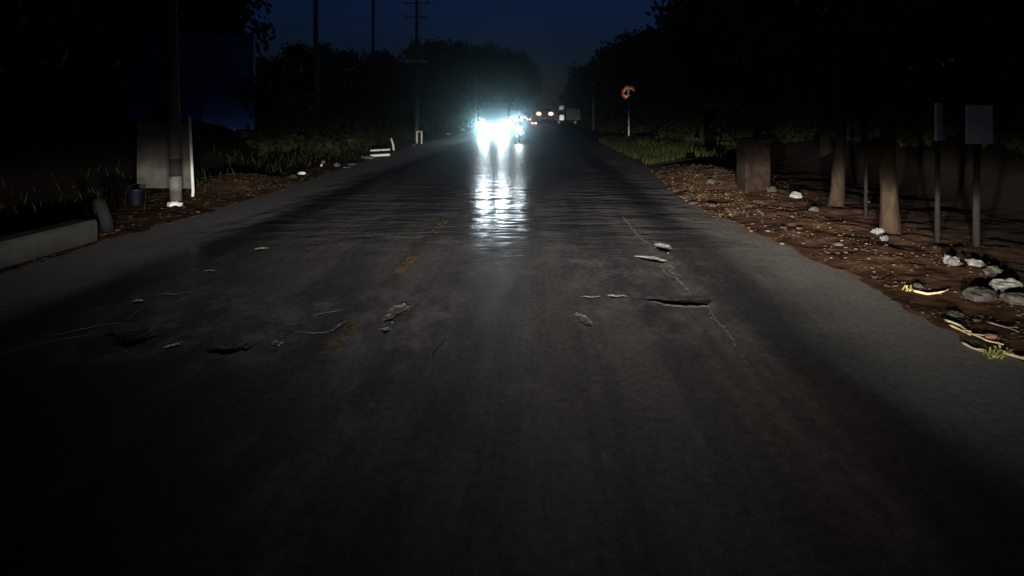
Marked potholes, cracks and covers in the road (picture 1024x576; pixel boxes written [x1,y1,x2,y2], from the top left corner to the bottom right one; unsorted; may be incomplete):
pothole [203,342,256,355]
pothole [103,326,158,348]
crack [295,309,347,335]
crack [2,291,193,353]
crack [623,217,747,365]
